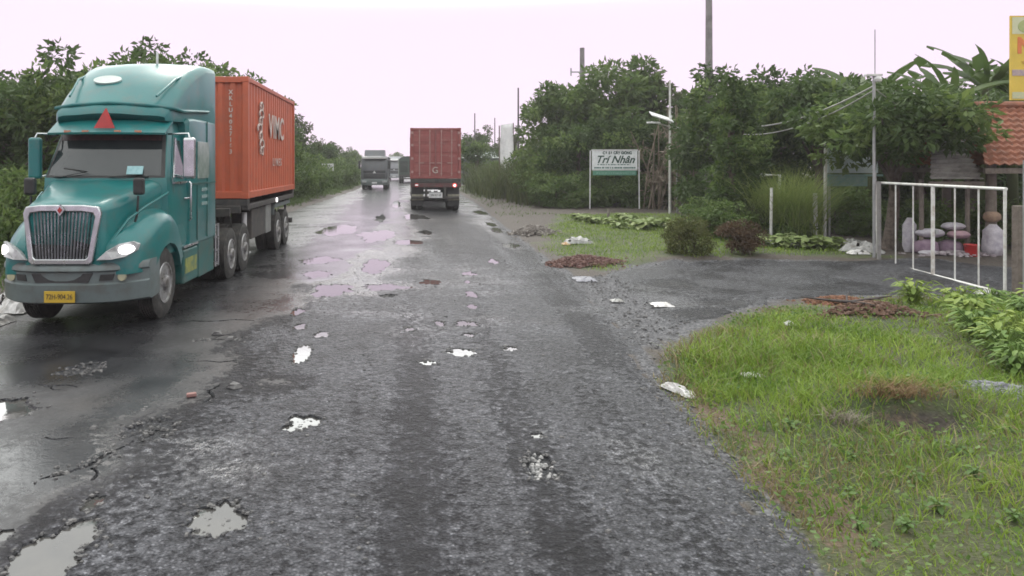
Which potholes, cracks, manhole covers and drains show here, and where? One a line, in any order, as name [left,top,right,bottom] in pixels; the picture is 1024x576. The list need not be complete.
pothole [51,361,107,377]
pothole [288,343,314,365]
pothole [0,508,110,576]
pothole [315,224,358,236]
pothole [279,412,329,433]
pothole [518,450,564,484]
pothole [181,494,254,539]
pothole [441,347,482,357]
crack [34,437,128,484]
pothole [361,258,395,275]
